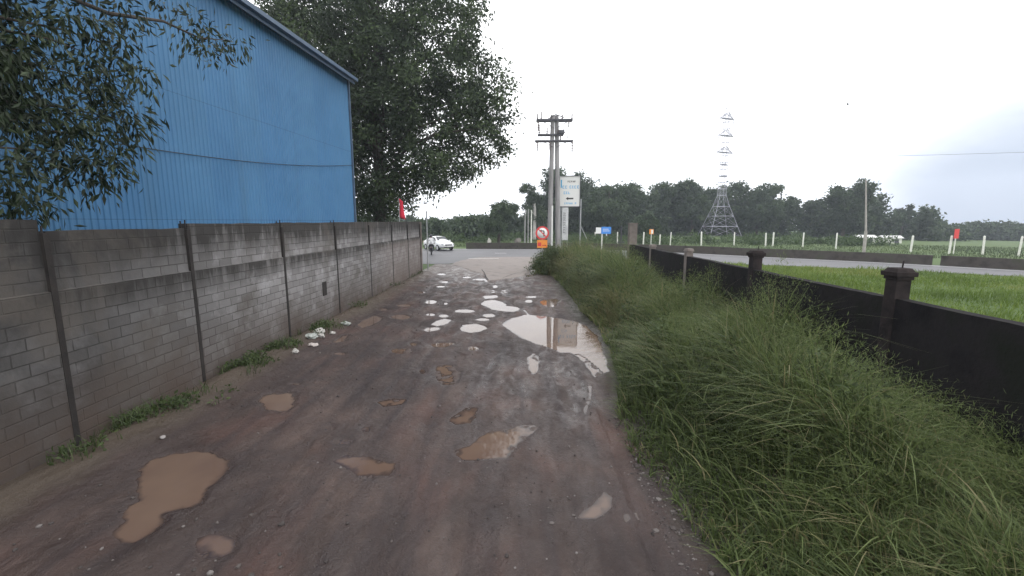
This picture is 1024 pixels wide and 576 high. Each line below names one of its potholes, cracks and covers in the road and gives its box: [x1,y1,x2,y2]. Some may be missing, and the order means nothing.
pothole [572,487,622,522]
pothole [354,314,387,328]
pothole [572,354,606,378]
pothole [371,396,411,407]
pothole [443,404,483,425]
pothole [457,323,490,333]
pothole [98,447,239,545]
pothole [478,299,522,312]
pothole [448,421,543,463]
pothole [185,527,247,563]
pothole [251,390,303,414]
pothole [430,363,464,386]
